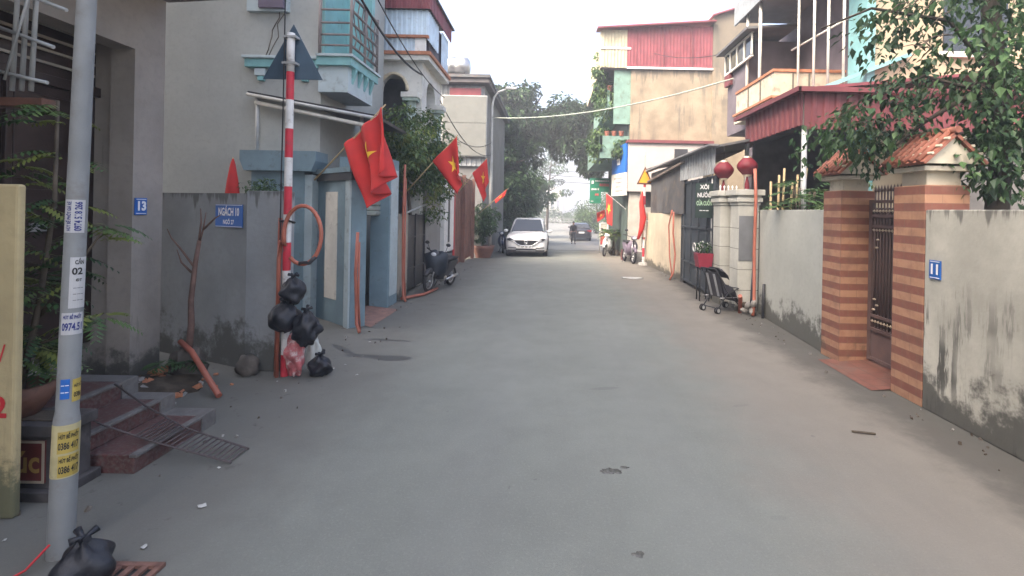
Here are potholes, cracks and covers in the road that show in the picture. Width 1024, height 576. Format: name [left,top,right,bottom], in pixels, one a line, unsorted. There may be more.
drain grate [111,561,166,576]
